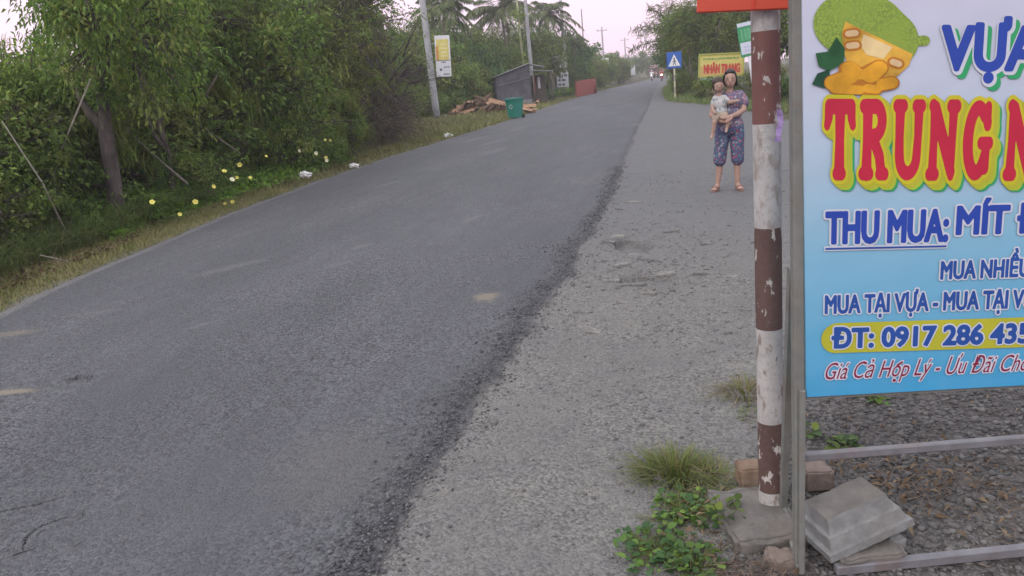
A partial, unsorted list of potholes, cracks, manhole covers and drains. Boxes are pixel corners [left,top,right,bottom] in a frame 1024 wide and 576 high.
pothole [57,374,95,383]
crack [0,491,83,556]
pothole [599,238,658,256]
